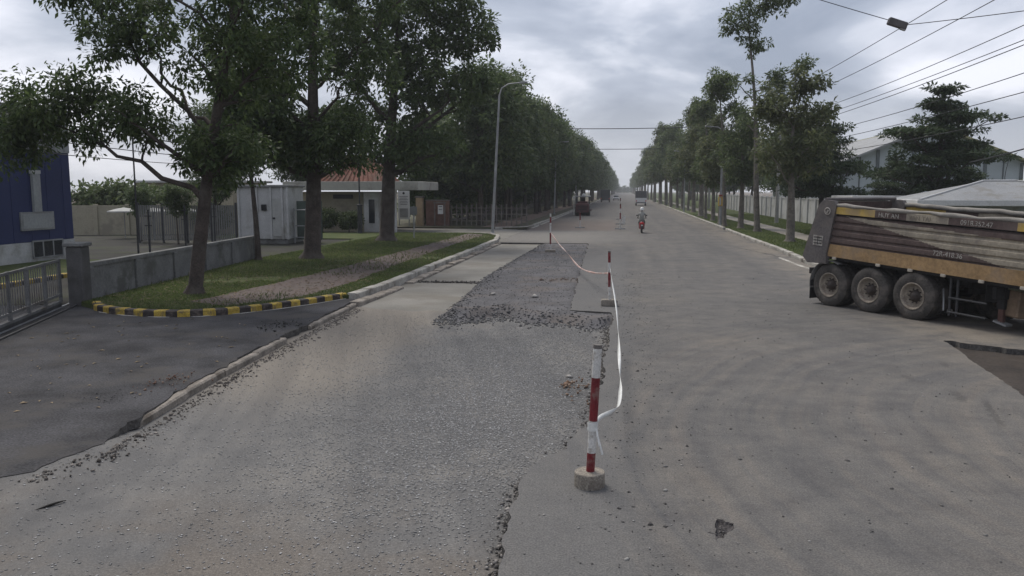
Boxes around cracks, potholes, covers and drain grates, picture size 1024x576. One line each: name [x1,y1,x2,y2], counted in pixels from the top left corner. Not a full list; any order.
pothole [710,519,734,540]
